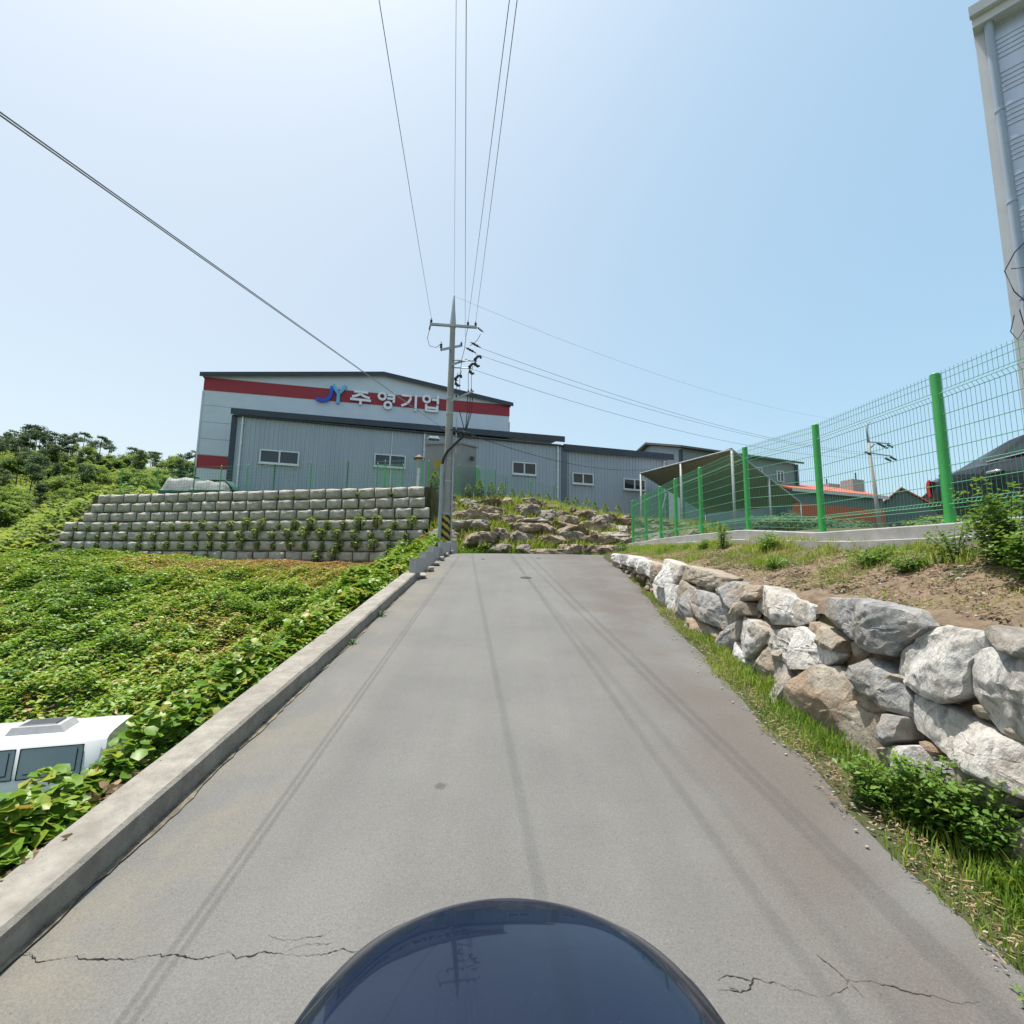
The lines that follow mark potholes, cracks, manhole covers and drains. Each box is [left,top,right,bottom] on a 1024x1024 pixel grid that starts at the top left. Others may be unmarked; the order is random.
crack [818,955,977,1004]
crack [717,975,812,995]
crack [23,934,358,962]
